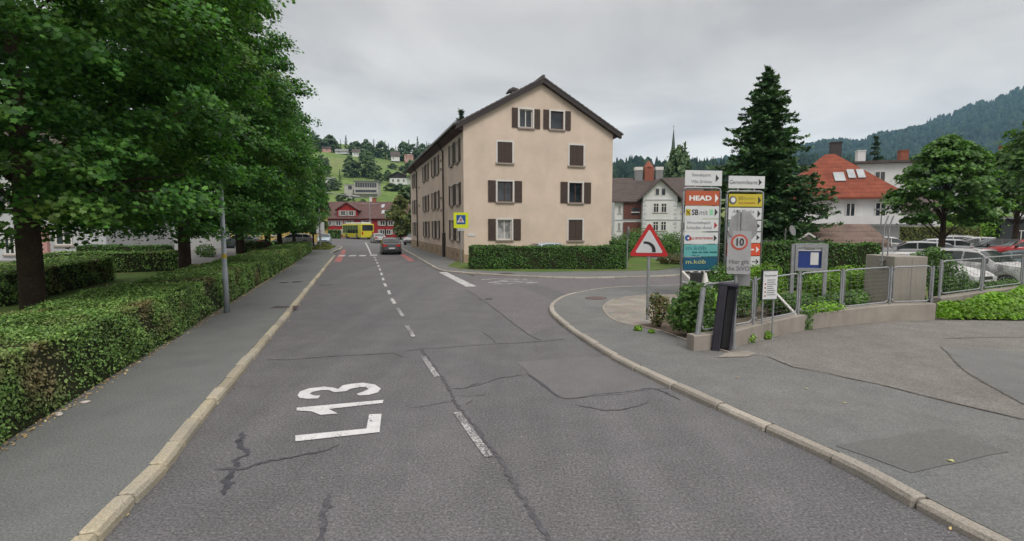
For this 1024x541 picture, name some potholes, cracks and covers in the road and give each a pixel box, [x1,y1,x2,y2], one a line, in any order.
crack [411,374,525,408]
crack [270,332,560,360]
